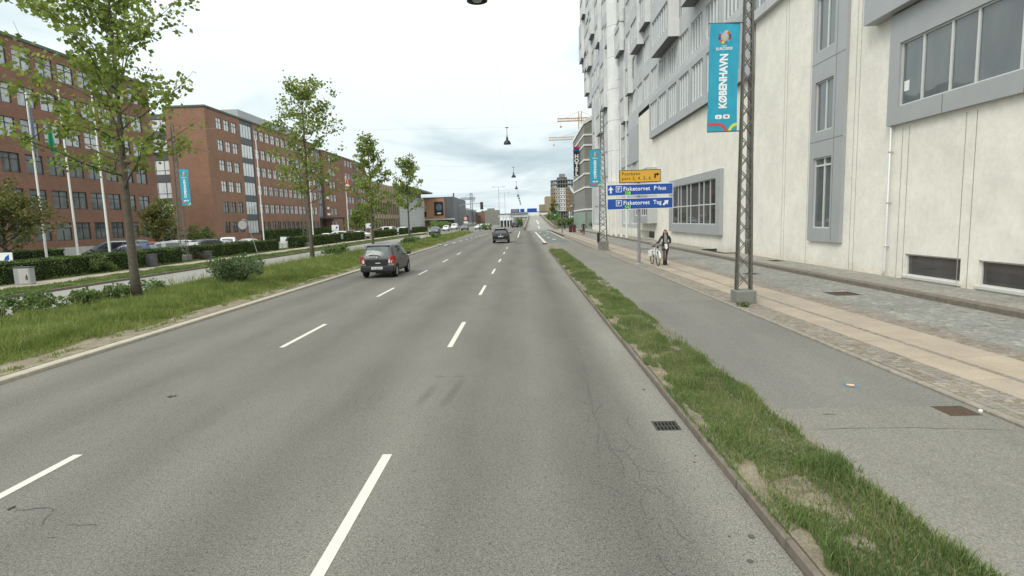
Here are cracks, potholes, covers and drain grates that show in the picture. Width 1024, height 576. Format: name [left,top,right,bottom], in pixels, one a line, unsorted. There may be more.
crack [579,353,684,574]
drain grate [652,421,682,431]
crack [16,507,97,538]
